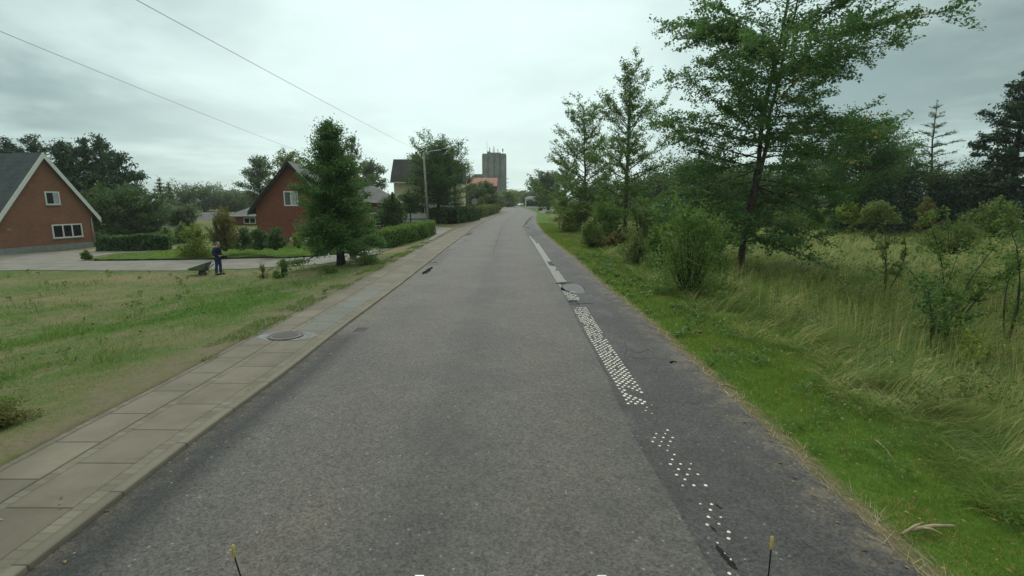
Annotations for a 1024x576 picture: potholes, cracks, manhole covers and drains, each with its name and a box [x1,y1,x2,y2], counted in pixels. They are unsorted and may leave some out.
manhole cover [255,331,319,341]
